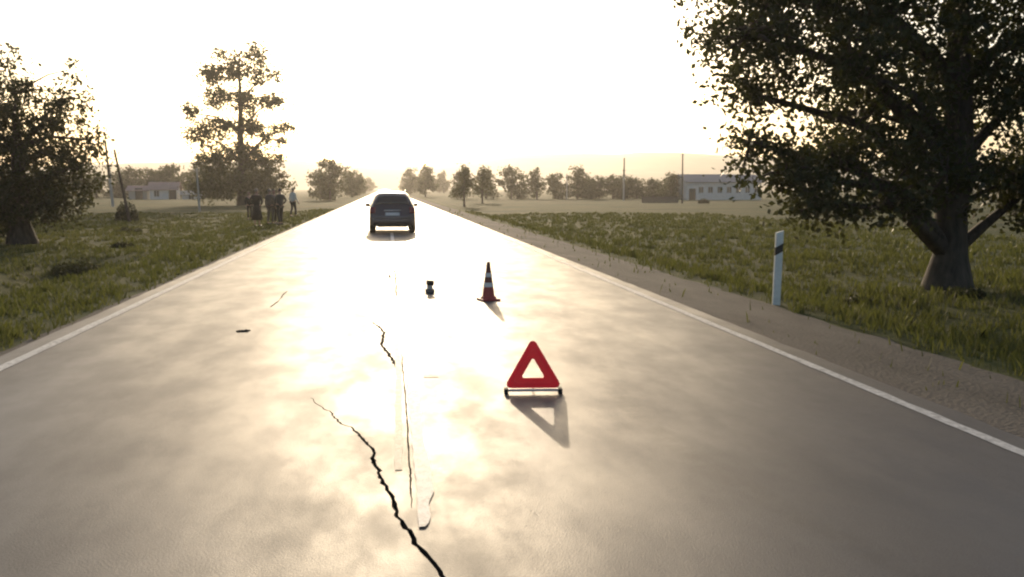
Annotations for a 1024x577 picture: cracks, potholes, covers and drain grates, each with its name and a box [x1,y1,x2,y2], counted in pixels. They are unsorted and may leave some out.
crack [311,398,445,577]
crack [373,322,395,366]
